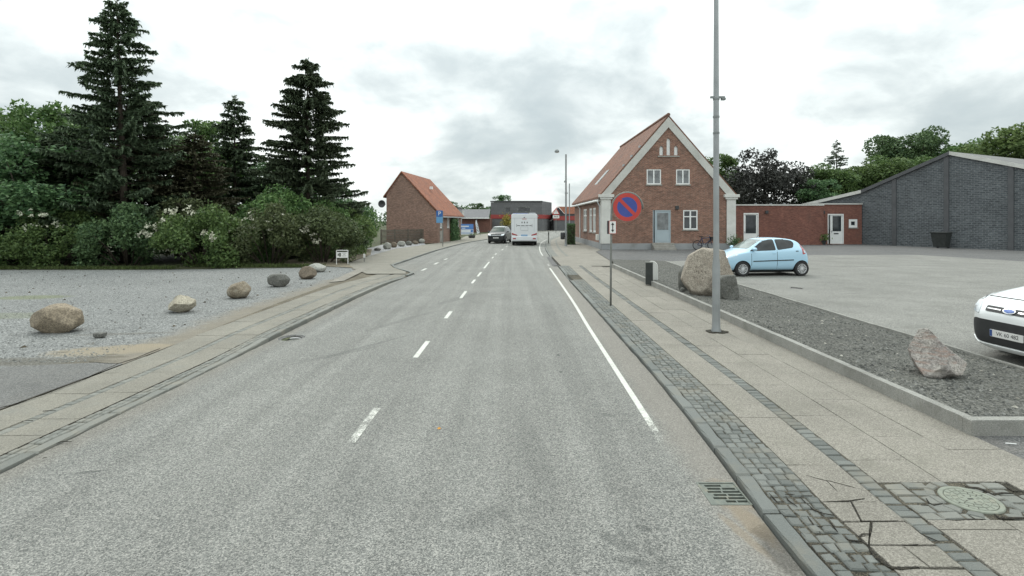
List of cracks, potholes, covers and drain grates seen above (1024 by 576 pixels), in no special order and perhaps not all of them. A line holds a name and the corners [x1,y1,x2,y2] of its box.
manhole cover [937,486,1006,515]
crack [769,475,1024,570]
drain grate [696,482,753,506]
